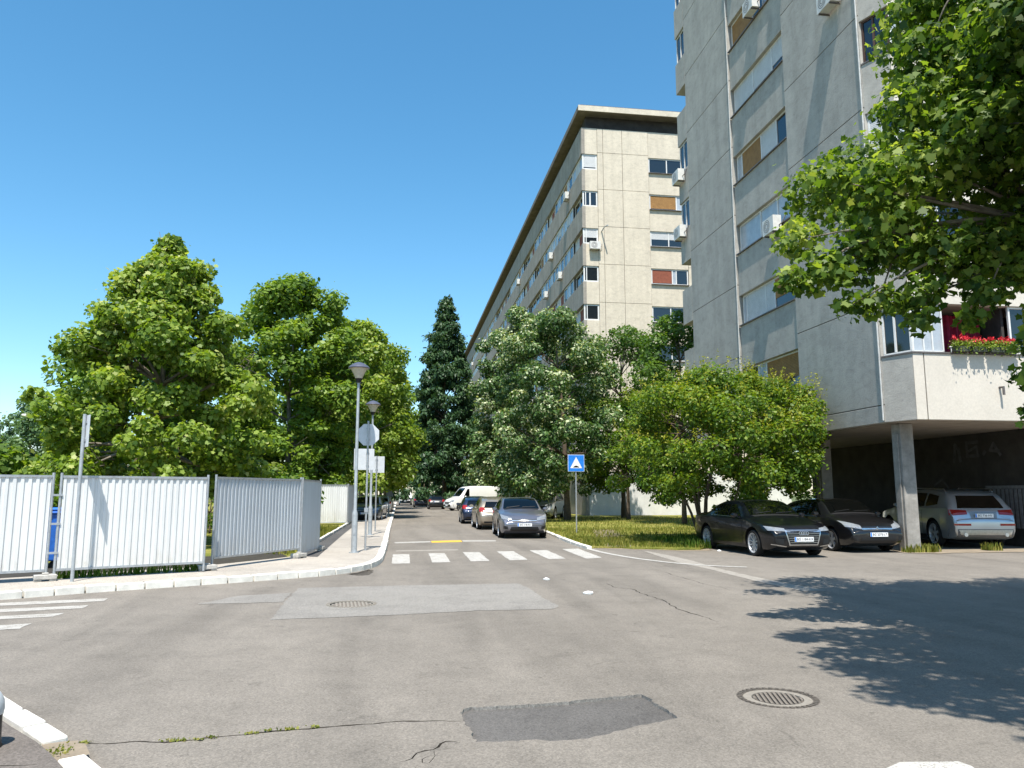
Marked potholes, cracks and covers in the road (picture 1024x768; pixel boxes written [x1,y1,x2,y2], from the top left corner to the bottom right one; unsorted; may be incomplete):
crack [90,720,442,744]
manhole cover [326,600,377,608]
crack [401,741,455,763]
crack [606,583,719,622]
